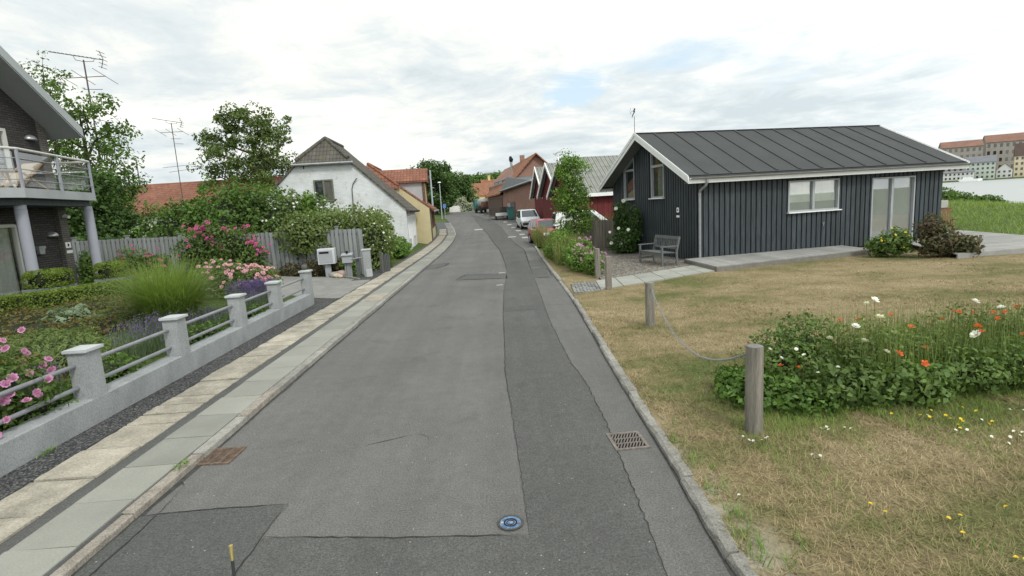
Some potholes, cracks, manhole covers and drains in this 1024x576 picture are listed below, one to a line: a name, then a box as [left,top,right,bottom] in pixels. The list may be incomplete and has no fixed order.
drain grate [606,431,651,451]
manhole cover [497,515,524,531]
drain grate [196,446,247,466]
